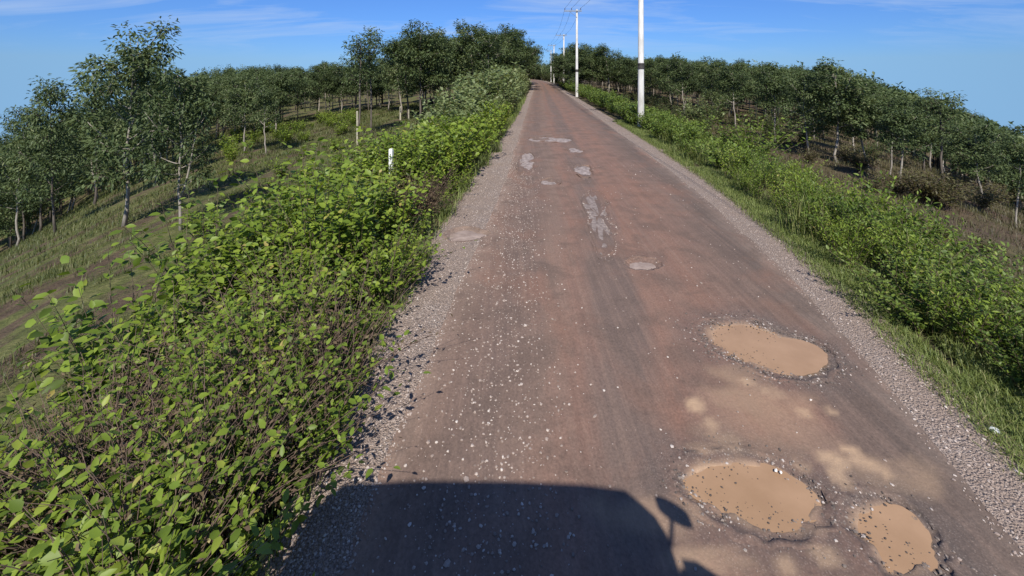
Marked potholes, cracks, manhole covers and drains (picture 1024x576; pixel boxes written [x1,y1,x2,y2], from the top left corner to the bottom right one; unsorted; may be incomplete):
pothole [515,150,537,176]
pothole [538,177,561,185]
pothole [621,255,665,272]
pothole [580,188,623,261]
pothole [823,475,975,576]
pothole [675,310,864,392]
pothole [651,435,863,568]
pothole [443,226,494,242]
pothole [571,164,595,179]
